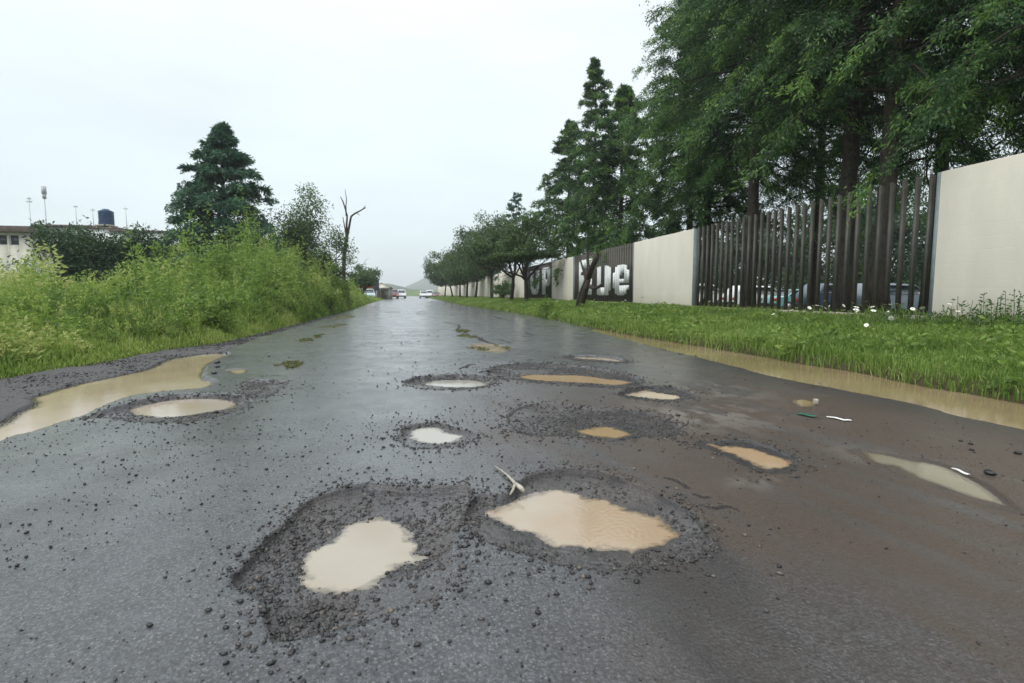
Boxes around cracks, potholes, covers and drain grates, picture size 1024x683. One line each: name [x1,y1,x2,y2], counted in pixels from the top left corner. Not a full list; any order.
pothole [467,343,513,353]
pothole [163,466,540,683]
pothole [483,398,733,452]
pothole [476,359,668,393]
pothole [600,384,715,406]
pothole [559,353,642,364]
pothole [855,449,1024,515]
pothole [405,454,784,613]
pothole [71,390,270,433]
pothole [386,369,510,392]
